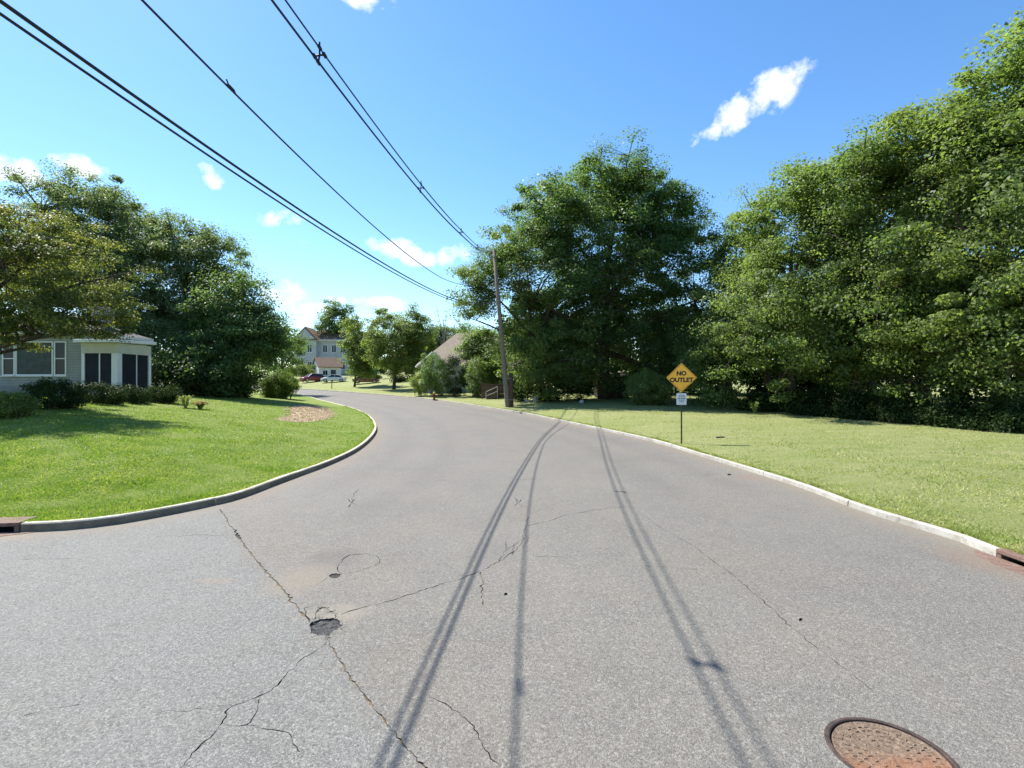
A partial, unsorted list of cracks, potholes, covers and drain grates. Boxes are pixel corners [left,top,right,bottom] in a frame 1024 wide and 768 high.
pothole [309,616,345,638]
manhole cover [824,717,960,768]
drain grate [974,548,1024,575]
crack [157,509,427,768]
drain grate [0,516,38,537]
crack [343,498,619,614]
